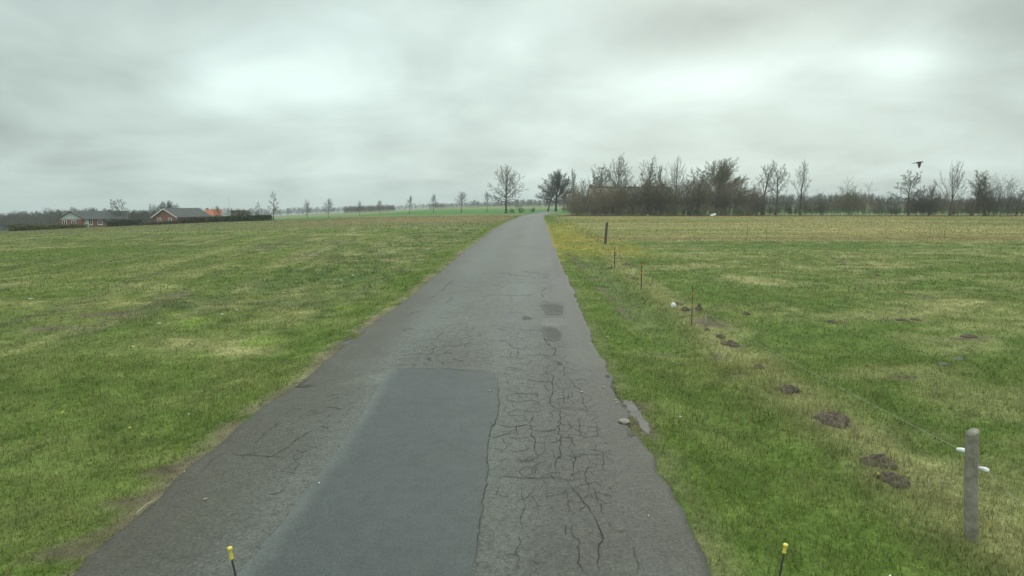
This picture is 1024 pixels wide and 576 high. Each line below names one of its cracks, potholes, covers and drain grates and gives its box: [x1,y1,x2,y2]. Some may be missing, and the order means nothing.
crack [236,266,639,572]
crack [202,394,352,476]
